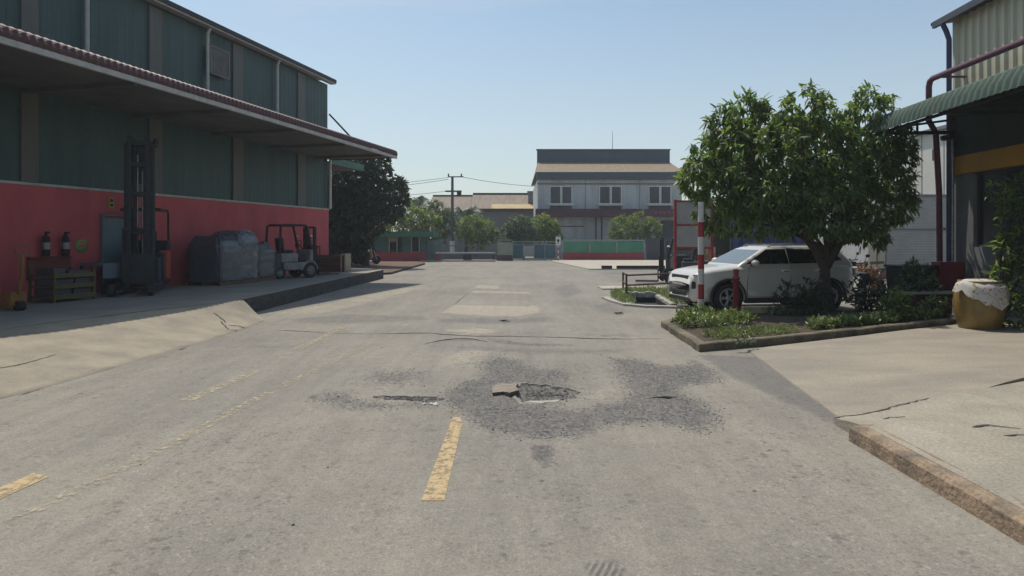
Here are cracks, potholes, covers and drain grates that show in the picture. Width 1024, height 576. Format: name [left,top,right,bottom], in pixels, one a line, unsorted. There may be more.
crack [972,424,1024,436]
crack [419,318,493,344]
pothole [512,382,585,404]
pothole [368,395,448,403]
